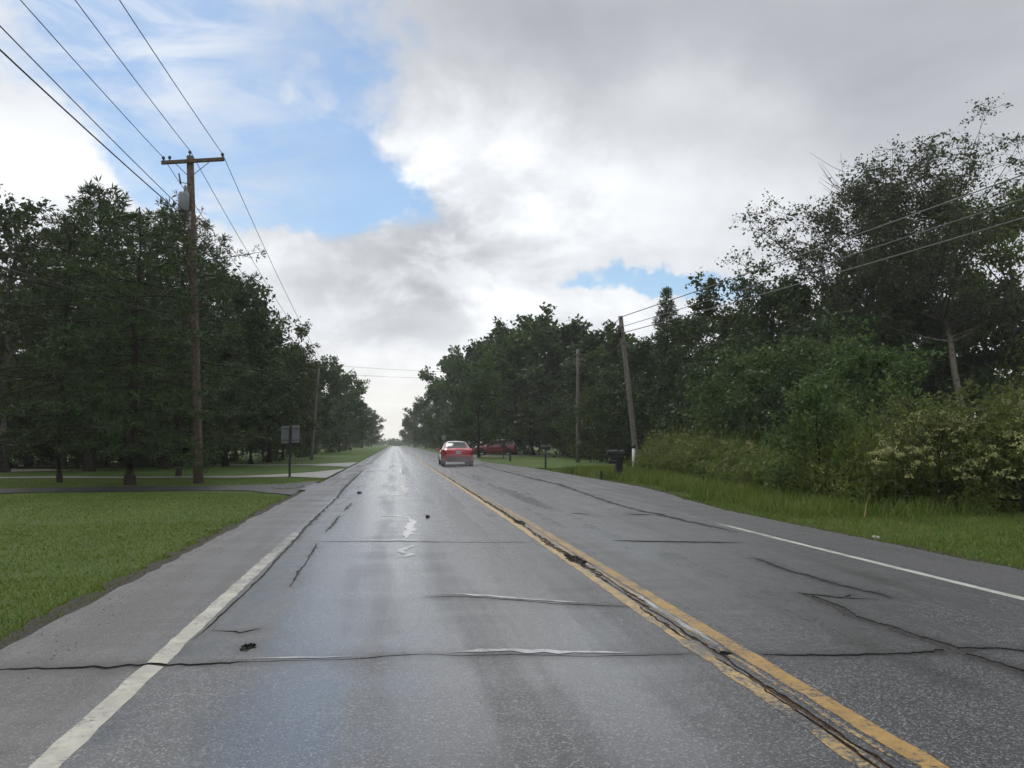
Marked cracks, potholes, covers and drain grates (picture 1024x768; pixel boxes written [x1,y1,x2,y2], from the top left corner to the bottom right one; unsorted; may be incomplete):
crack [193,472,498,640]
crack [444,596,621,607]
crack [0,654,680,670]
crack [482,465,735,543]
crack [756,558,1024,676]
